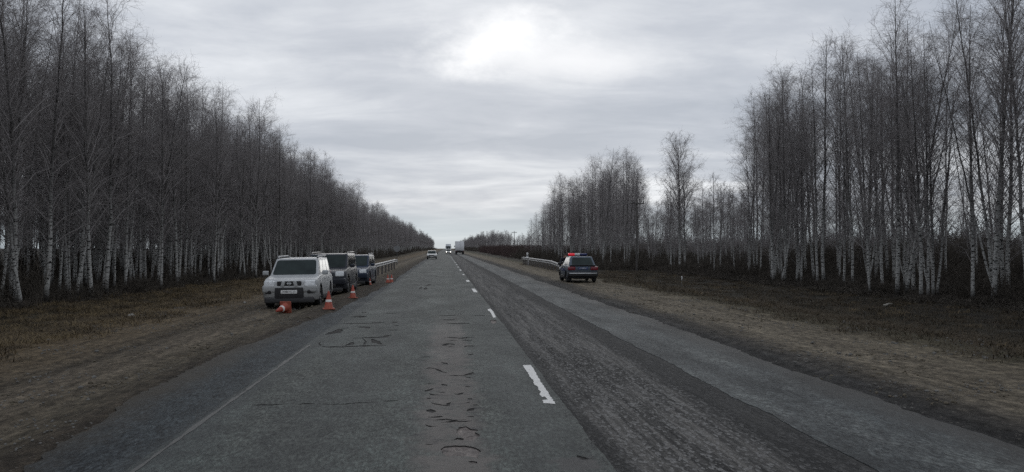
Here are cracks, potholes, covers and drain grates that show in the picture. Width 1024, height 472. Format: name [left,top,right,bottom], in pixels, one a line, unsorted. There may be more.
crack [423,315,487,427]
crack [318,312,399,348]
